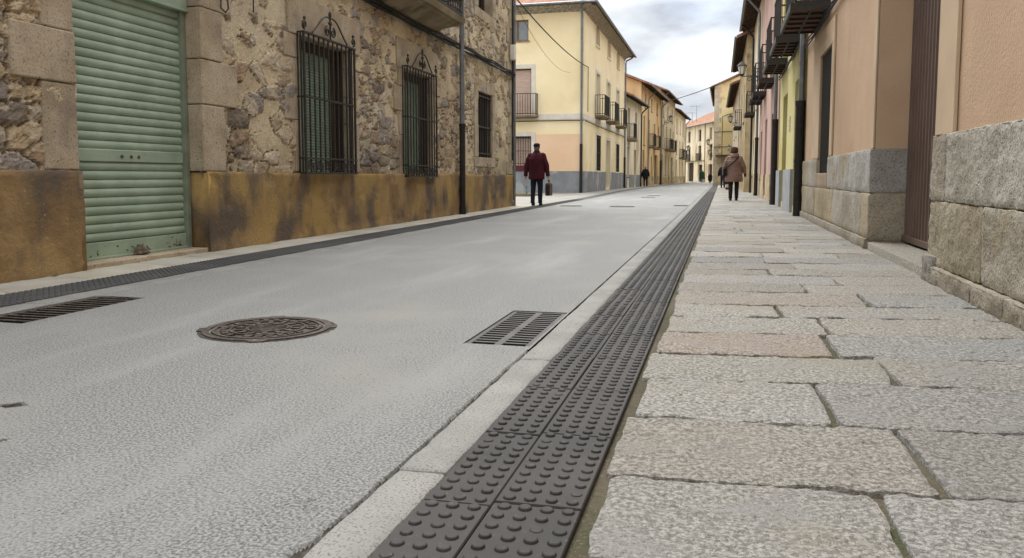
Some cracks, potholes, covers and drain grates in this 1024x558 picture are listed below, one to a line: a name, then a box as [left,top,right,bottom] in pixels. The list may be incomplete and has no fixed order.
drain grate [466,311,567,352]
manhole cover [196,316,337,343]
drain grate [0,296,141,324]
